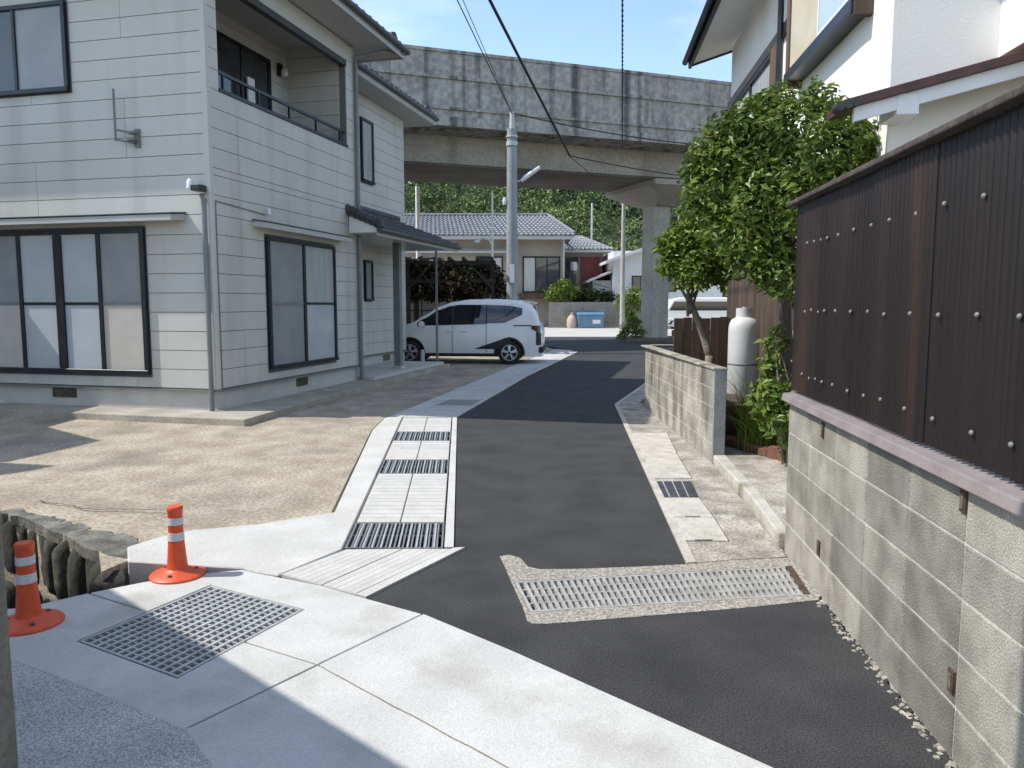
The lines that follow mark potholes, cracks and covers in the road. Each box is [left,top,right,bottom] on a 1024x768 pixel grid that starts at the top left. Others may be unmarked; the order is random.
drain grate [393,432,451,442]
drain grate [80,586,303,678]
drain grate [345,523,445,550]
drain grate [657,481,697,498]
drain grate [514,566,810,612]
drain grate [378,460,449,477]
crack [40,500,166,510]
